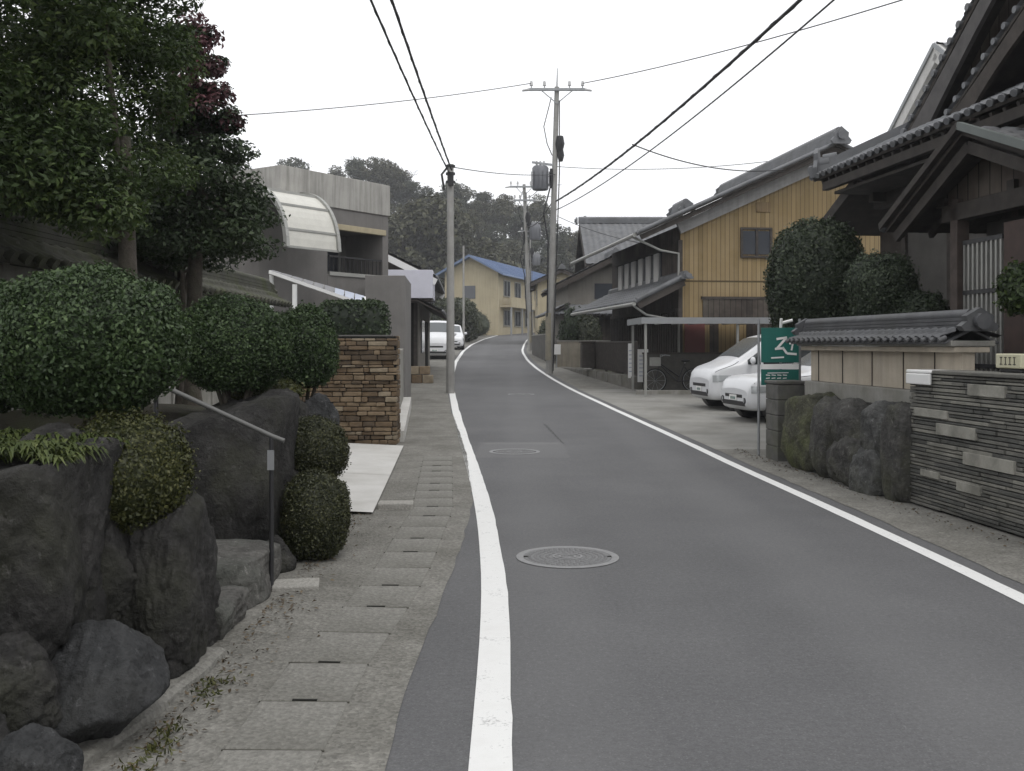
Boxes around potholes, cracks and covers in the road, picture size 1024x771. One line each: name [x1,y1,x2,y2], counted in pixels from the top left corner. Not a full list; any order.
manhole cover [516,546,619,568]
